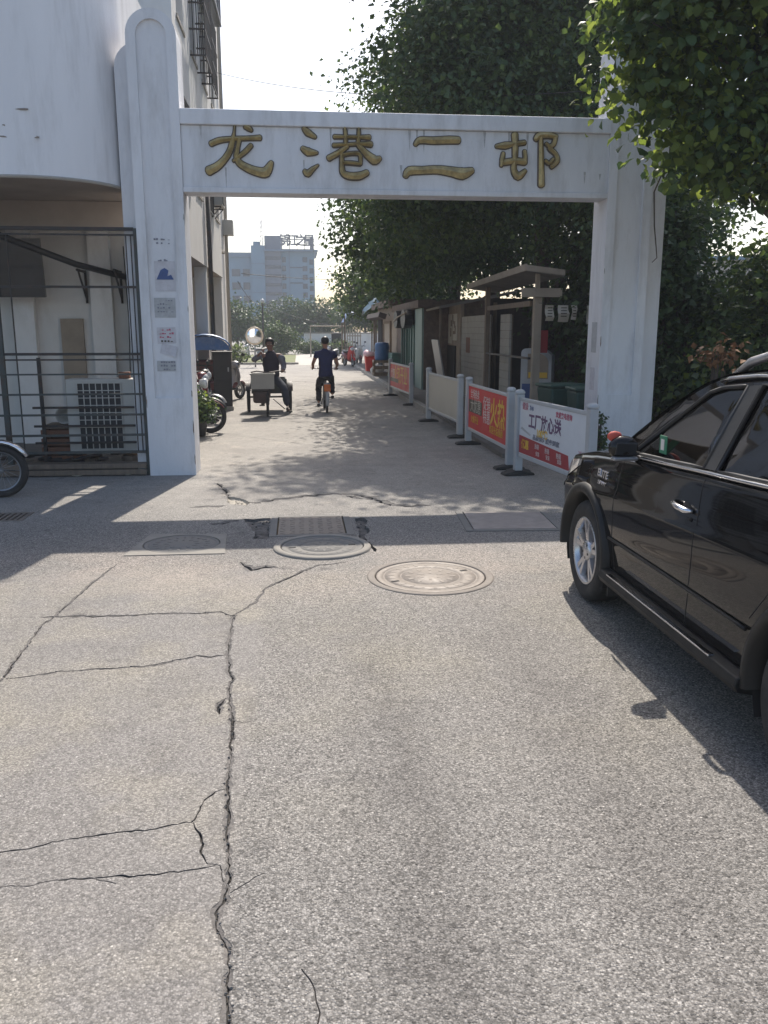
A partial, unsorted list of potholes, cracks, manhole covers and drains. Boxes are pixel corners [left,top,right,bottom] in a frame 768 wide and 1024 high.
pothole [244,518,271,539]
manhole cover [367,559,494,596]
manhole cover [124,534,227,556]
crack [190,483,431,525]
pothole [355,518,377,552]
manhole cover [269,515,354,537]
drain grate [0,512,34,521]
crack [0,562,344,1024]
manhole cover [273,534,371,560]
